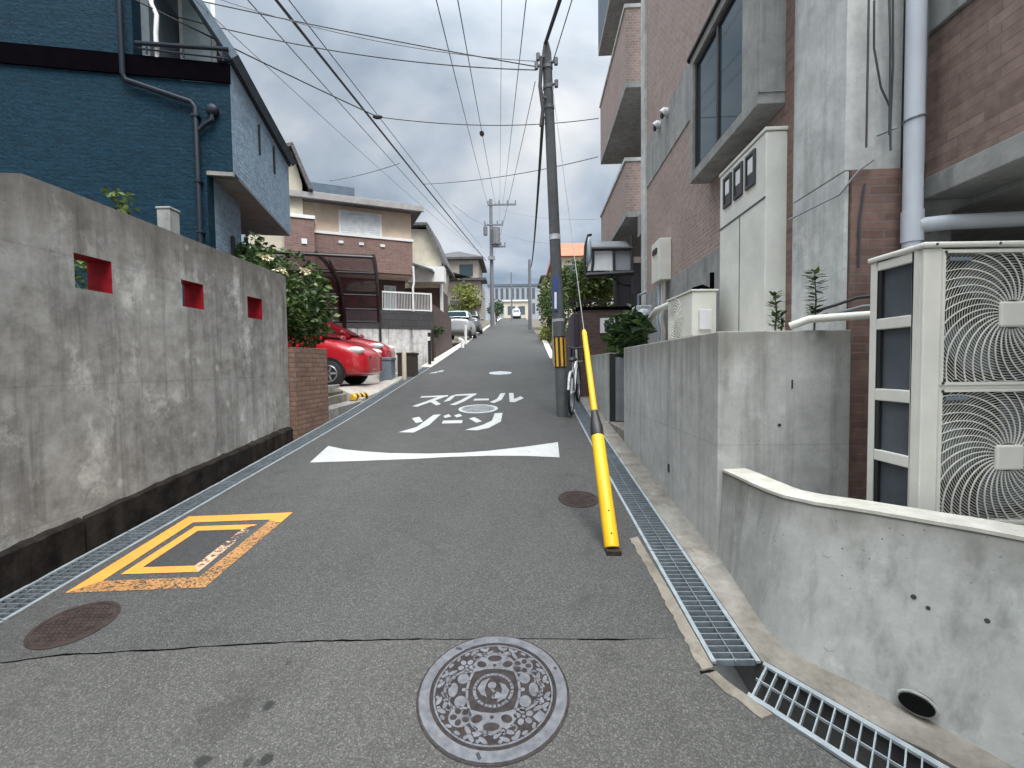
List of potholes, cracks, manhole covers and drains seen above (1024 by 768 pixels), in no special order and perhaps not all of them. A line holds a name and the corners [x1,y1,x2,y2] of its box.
drain grate [650,550,761,666]
manhole cover [558,490,599,508]
manhole cover [458,404,498,413]
drain grate [220,451,295,483]
crack [0,638,674,664]
drain grate [617,492,684,552]
drain grate [127,482,241,533]
manhole cover [23,601,121,650]
drain grate [747,661,950,768]
manhole cover [416,636,570,768]
